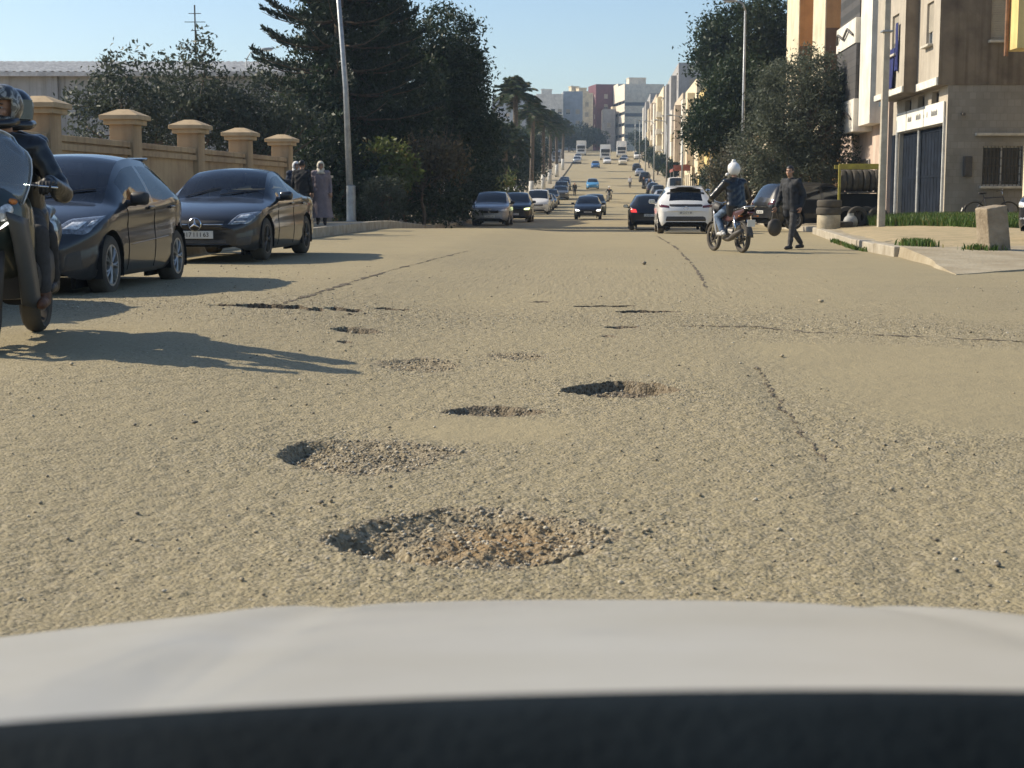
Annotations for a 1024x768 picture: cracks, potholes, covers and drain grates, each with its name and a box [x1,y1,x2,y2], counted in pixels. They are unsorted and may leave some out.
pothole [561,380,682,398]
pothole [333,326,382,334]
pothole [370,356,461,373]
pothole [439,405,547,417]
crack [754,367,826,461]
pothole [488,352,548,361]
pothole [276,439,470,476]
pothole [318,506,625,571]
